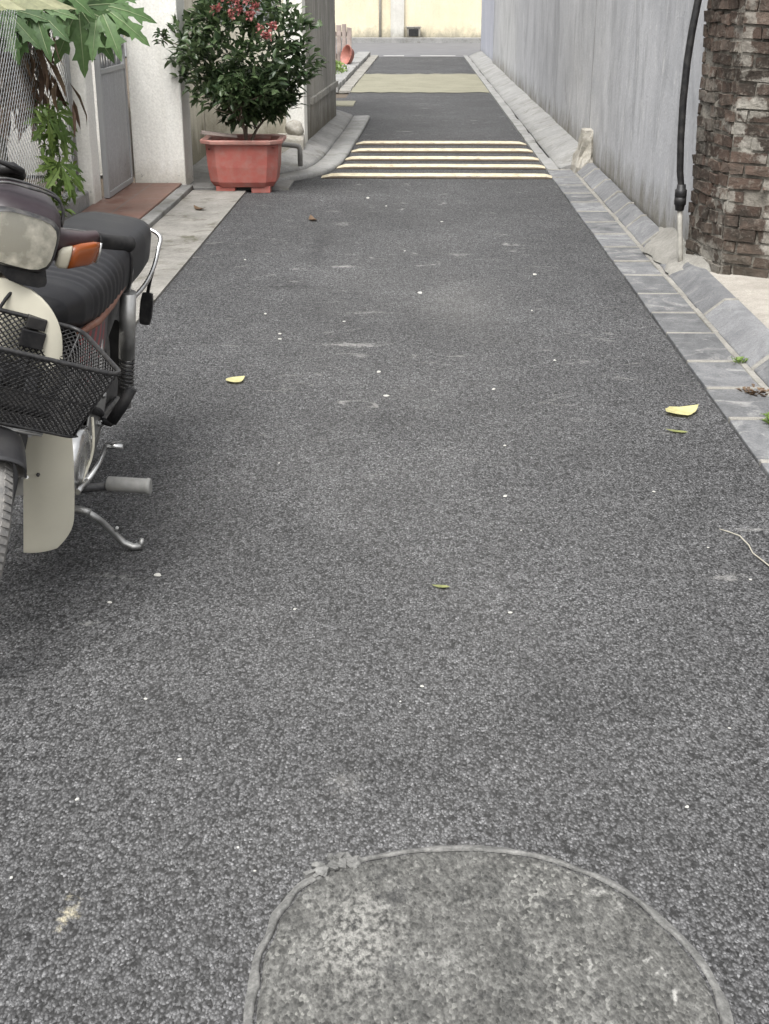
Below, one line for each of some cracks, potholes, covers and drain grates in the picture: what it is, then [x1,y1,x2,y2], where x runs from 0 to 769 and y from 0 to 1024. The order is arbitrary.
manhole cover [243,845,734,1024]
